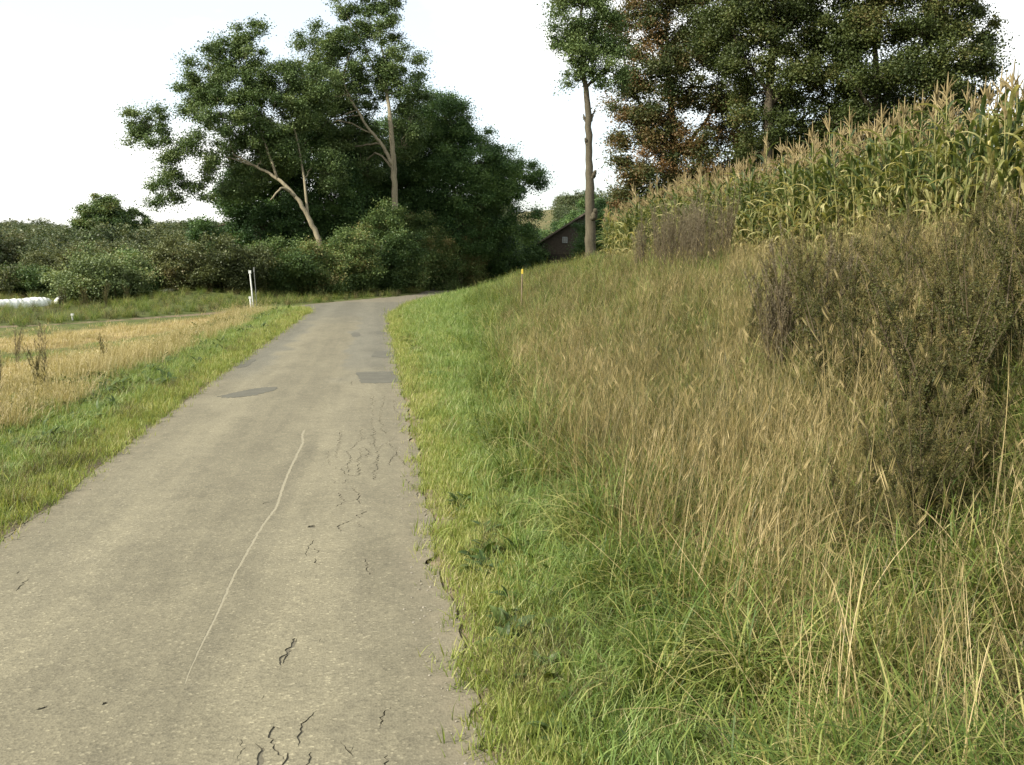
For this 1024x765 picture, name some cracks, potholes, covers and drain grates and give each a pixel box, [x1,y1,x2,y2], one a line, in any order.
crack [327,381,427,530]
crack [184,429,321,697]
crack [237,711,316,765]
